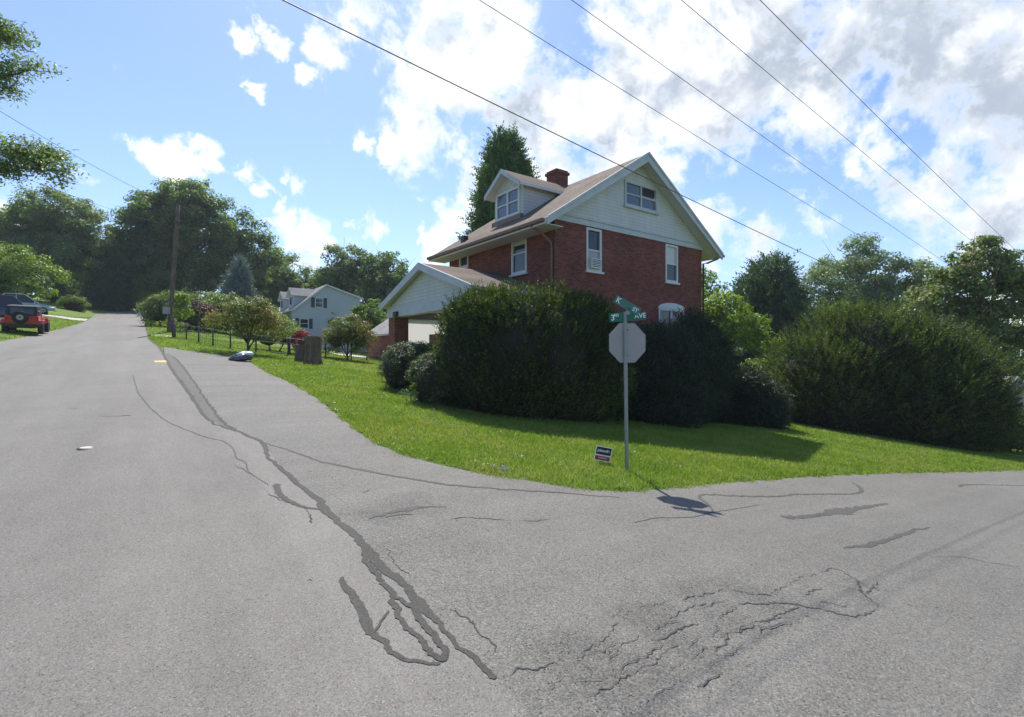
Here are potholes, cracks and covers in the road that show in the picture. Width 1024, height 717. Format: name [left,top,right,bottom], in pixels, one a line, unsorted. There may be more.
crack [362,490,591,521]
crack [122,375,313,523]
crack [450,565,896,696]
